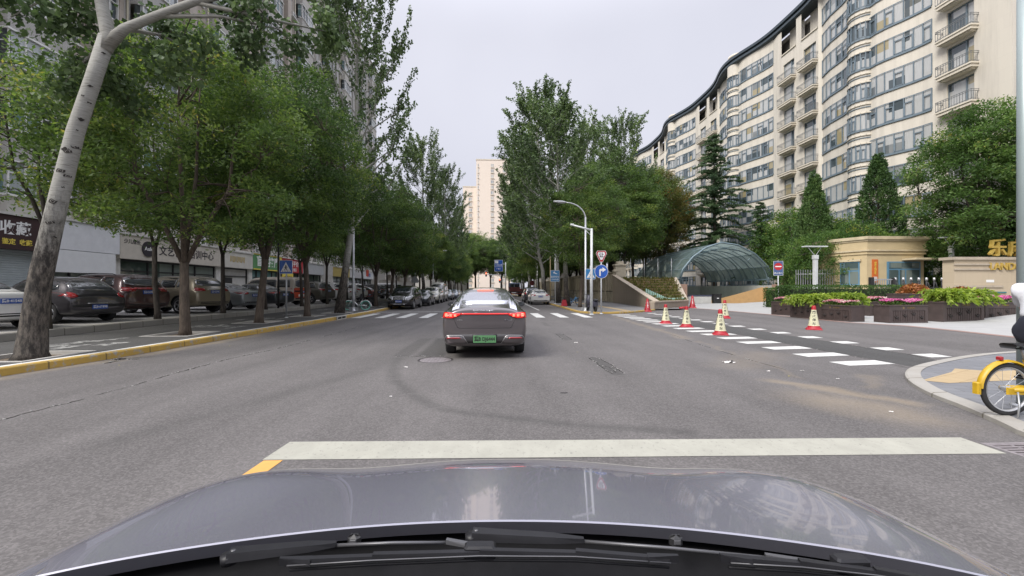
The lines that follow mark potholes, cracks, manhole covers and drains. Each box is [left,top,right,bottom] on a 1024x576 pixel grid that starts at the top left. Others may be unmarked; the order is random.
drain grate [982,442,1024,457]
